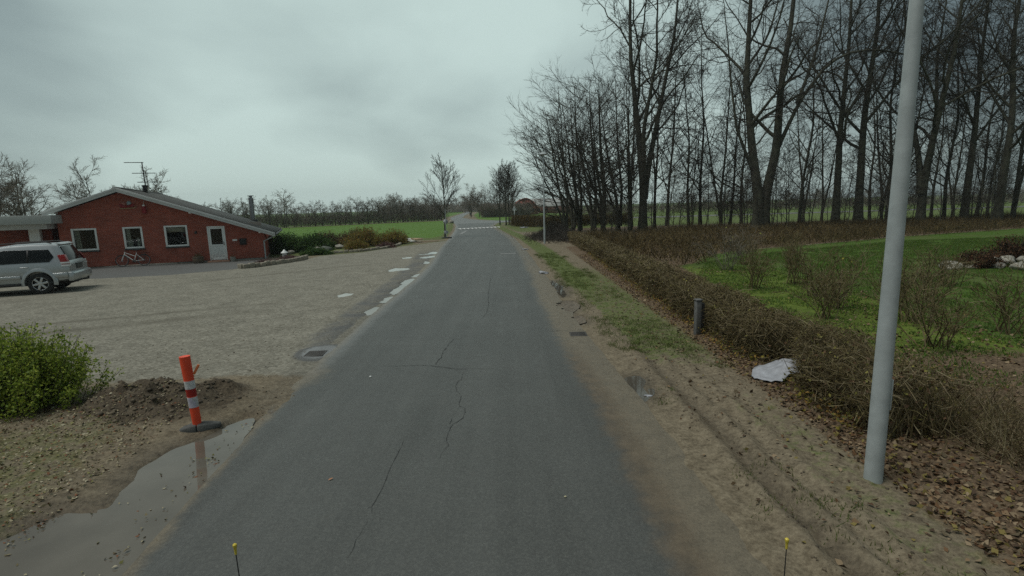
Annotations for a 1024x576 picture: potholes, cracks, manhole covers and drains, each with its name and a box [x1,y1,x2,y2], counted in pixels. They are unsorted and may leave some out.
crack [404,279,491,456]
